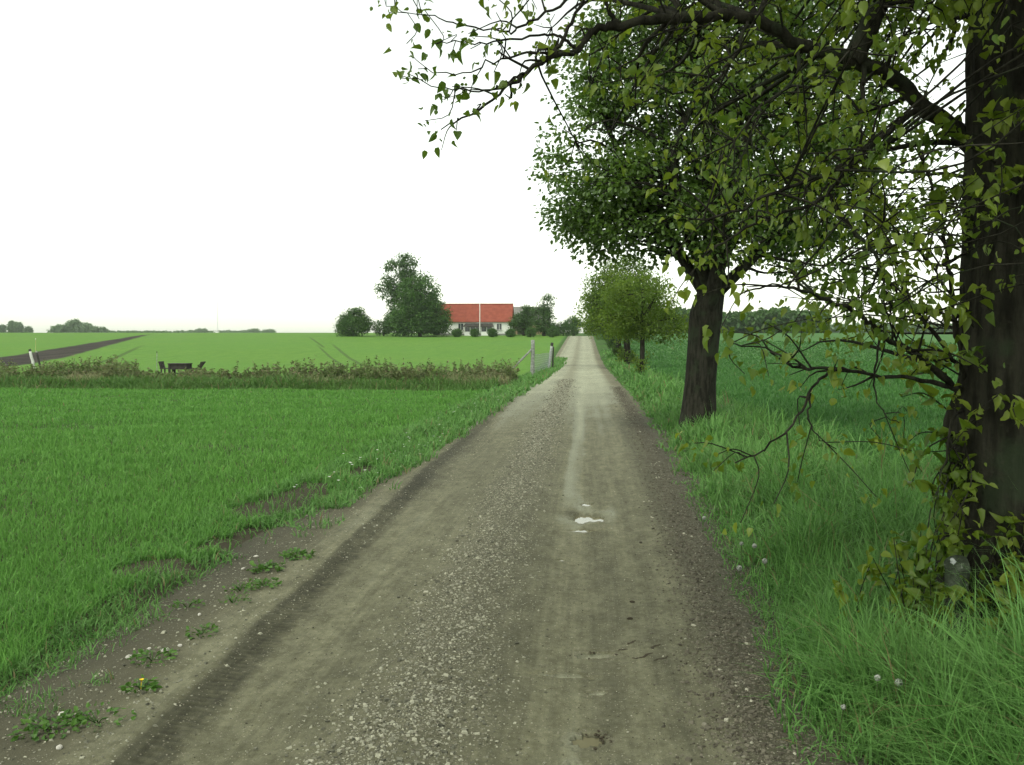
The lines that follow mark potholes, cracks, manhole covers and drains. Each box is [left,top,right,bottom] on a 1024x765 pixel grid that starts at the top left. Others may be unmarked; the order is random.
pothole [563,512,615,525]
pothole [559,728,615,752]
